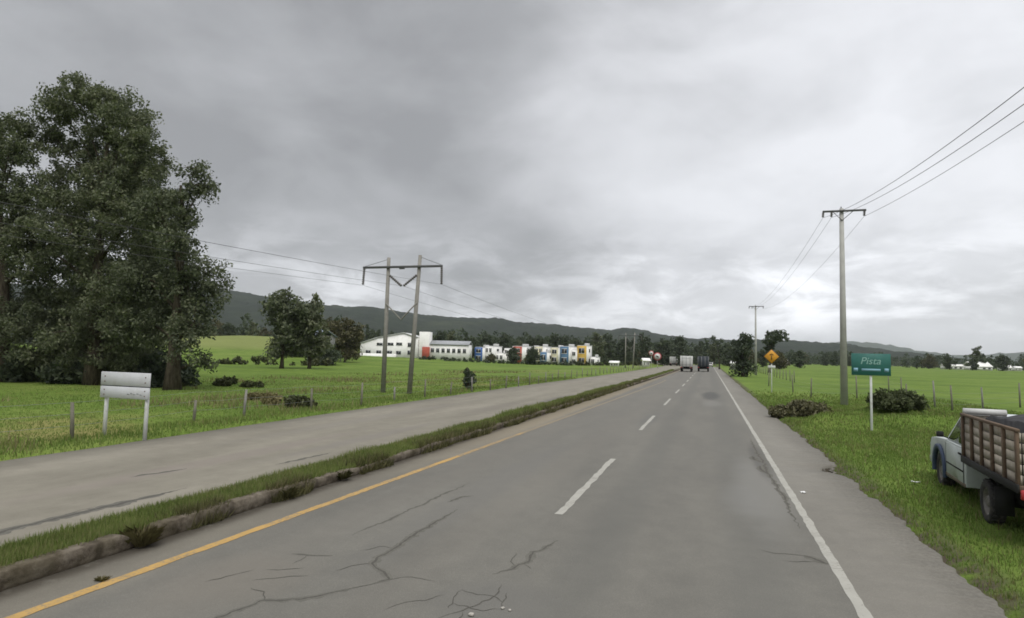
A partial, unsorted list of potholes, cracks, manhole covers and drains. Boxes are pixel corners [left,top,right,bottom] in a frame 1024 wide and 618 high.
crack [276,453,328,465]
crack [134,468,187,477]
crack [212,483,558,618]
